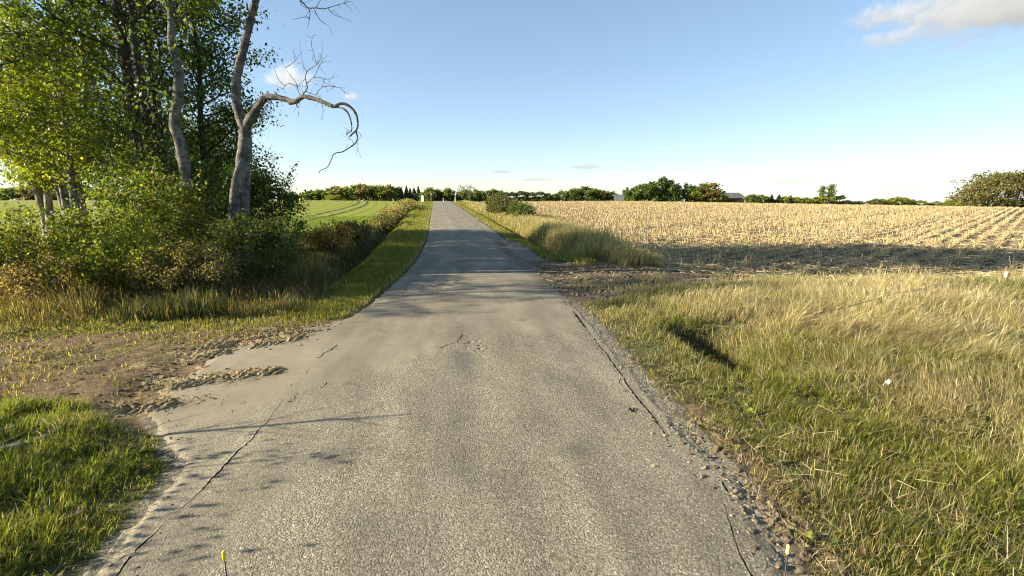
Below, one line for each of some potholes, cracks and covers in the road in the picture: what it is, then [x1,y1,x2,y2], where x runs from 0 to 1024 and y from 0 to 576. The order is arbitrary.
crack [441,334,465,348]
crack [111,392,300,576]
crack [560,297,673,446]
crack [317,345,339,358]
crack [717,478,758,576]
